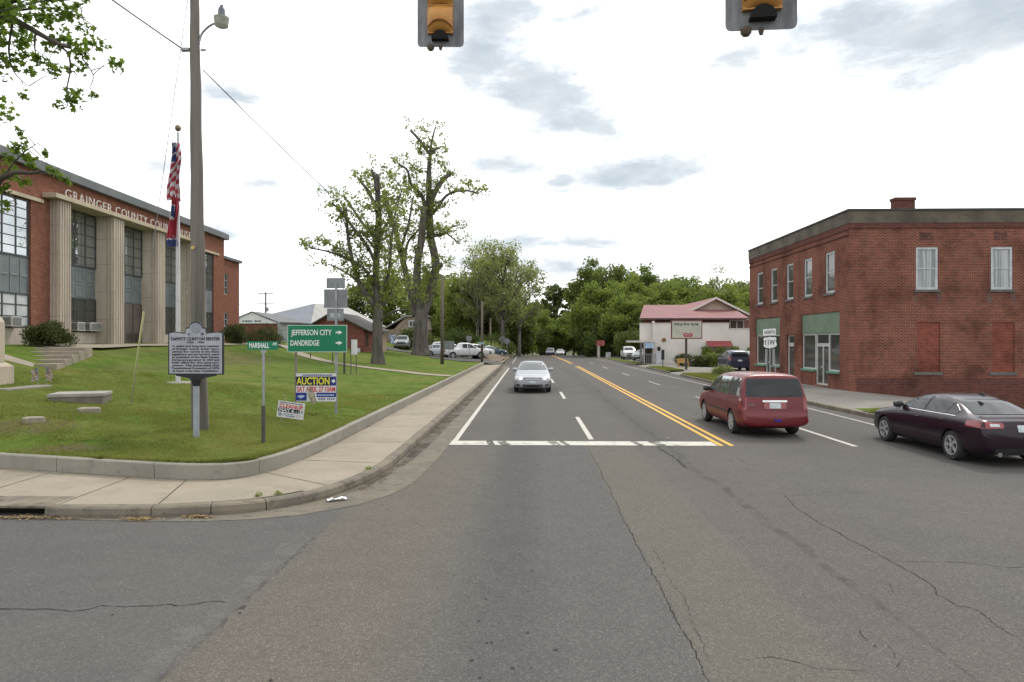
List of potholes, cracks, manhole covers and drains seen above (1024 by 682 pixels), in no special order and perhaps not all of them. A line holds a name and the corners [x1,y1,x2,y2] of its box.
drain grate [0,496,76,513]
crack [589,451,709,682]
crack [770,491,1013,634]
crack [0,601,224,612]
